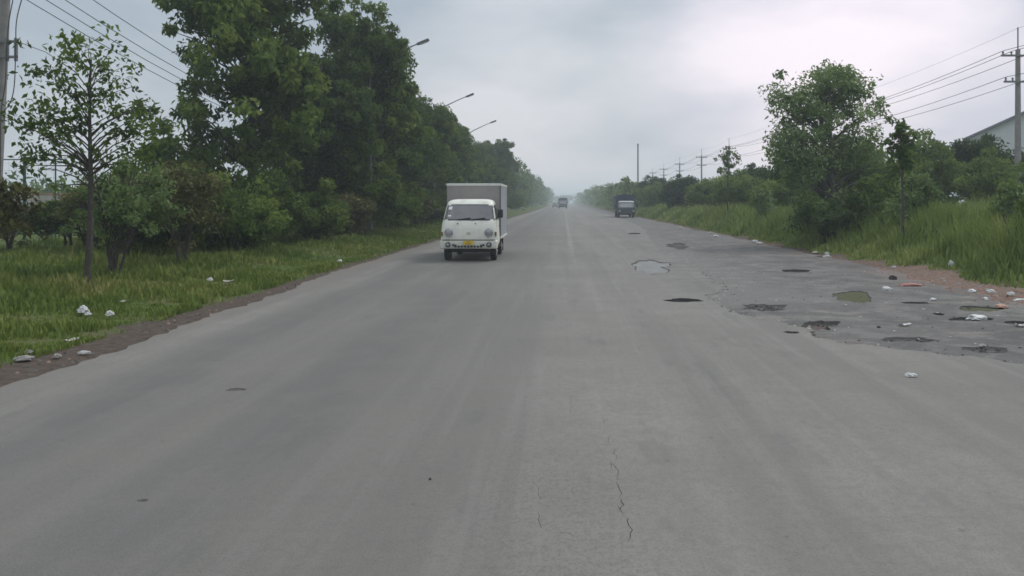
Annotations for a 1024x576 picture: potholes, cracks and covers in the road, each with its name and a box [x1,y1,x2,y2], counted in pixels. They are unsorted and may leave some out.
crack [569,394,633,542]
pothole [801,320,840,330]
pothole [631,259,671,275]
pothole [832,291,872,303]
